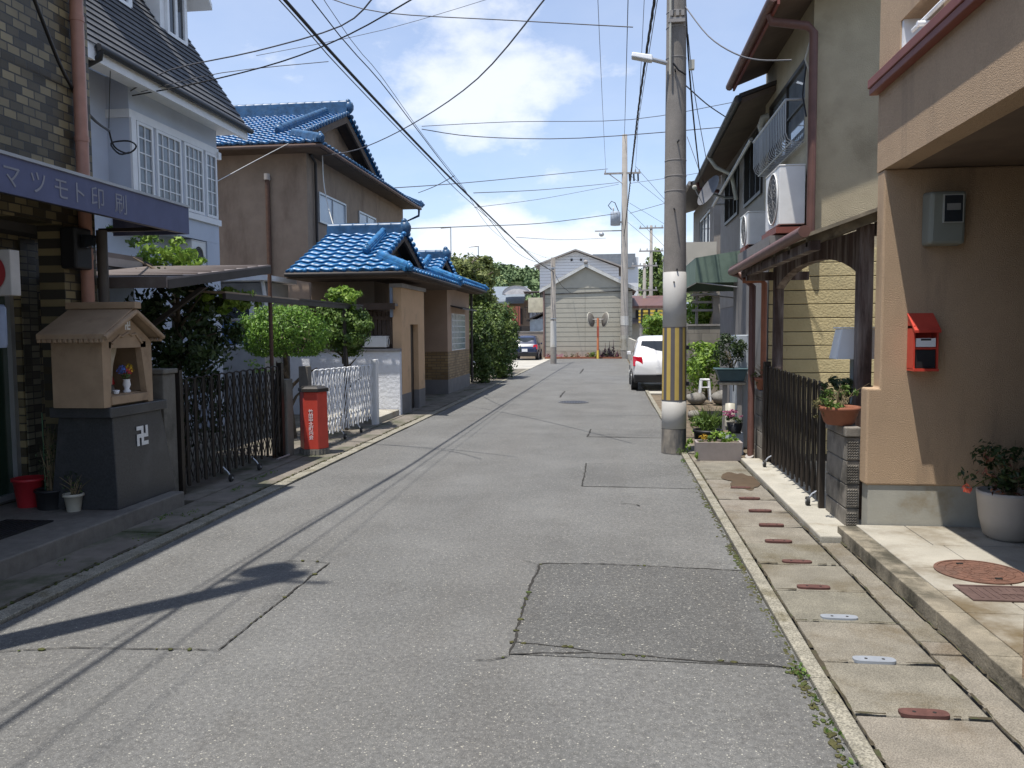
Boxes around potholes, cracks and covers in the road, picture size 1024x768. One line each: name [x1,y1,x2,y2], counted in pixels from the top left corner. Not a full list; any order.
manhole cover [933,559,1024,585]
manhole cover [953,584,1024,603]
